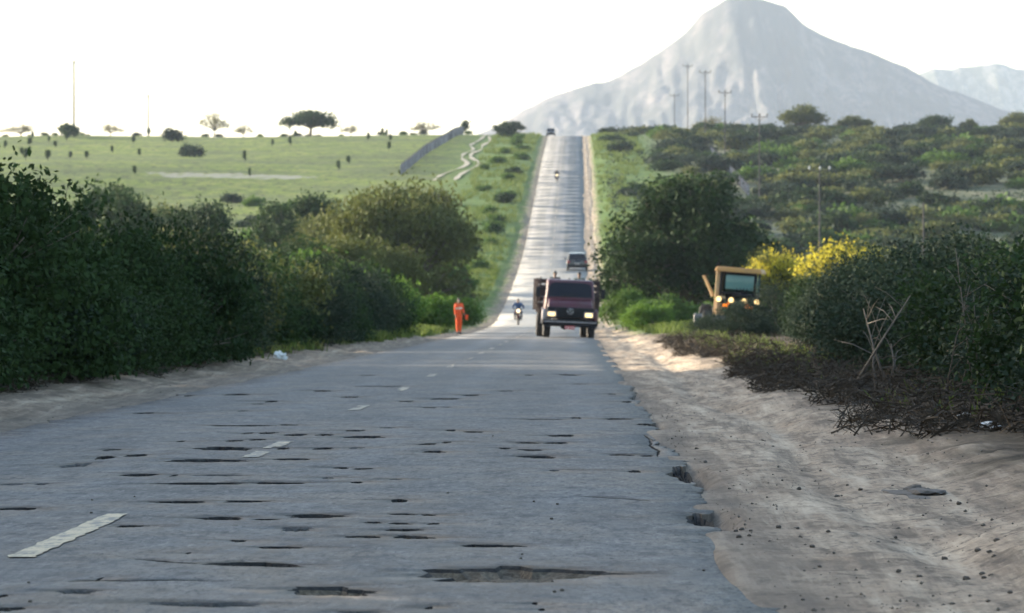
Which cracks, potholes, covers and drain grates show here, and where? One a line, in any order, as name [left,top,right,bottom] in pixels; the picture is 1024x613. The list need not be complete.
pothole [419,566,635,583]
pothole [672,466,693,483]
crack [644,435,661,457]
pothole [685,513,714,527]
pothole [286,587,377,596]
